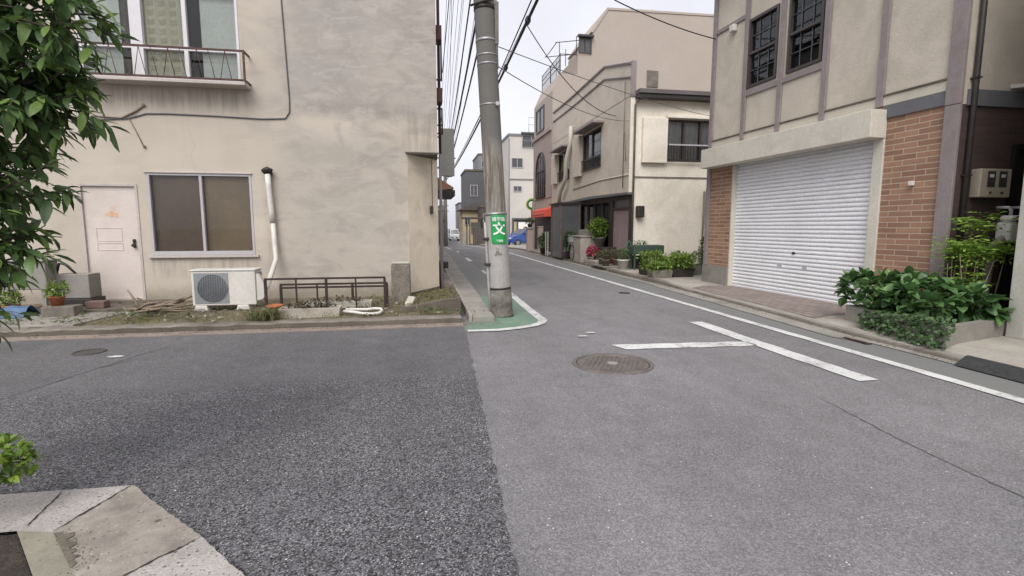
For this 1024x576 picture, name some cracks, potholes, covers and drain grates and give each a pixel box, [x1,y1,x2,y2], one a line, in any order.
manhole cover [71,348,107,356]
manhole cover [572,353,654,375]
